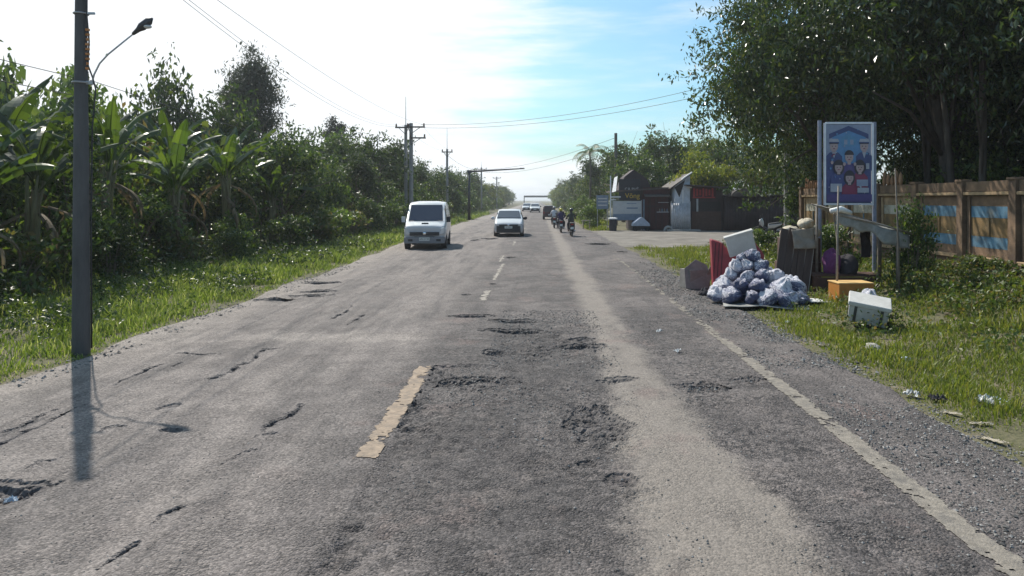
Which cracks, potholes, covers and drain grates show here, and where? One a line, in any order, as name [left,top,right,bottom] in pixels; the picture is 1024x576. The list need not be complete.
pothole [537,341,624,352]
pothole [433,312,516,320]
pothole [454,325,573,337]
pothole [553,334,610,343]
pothole [0,473,99,513]
pothole [548,401,655,453]
pothole [394,373,522,392]
pothole [581,373,655,387]
pothole [469,347,519,359]
